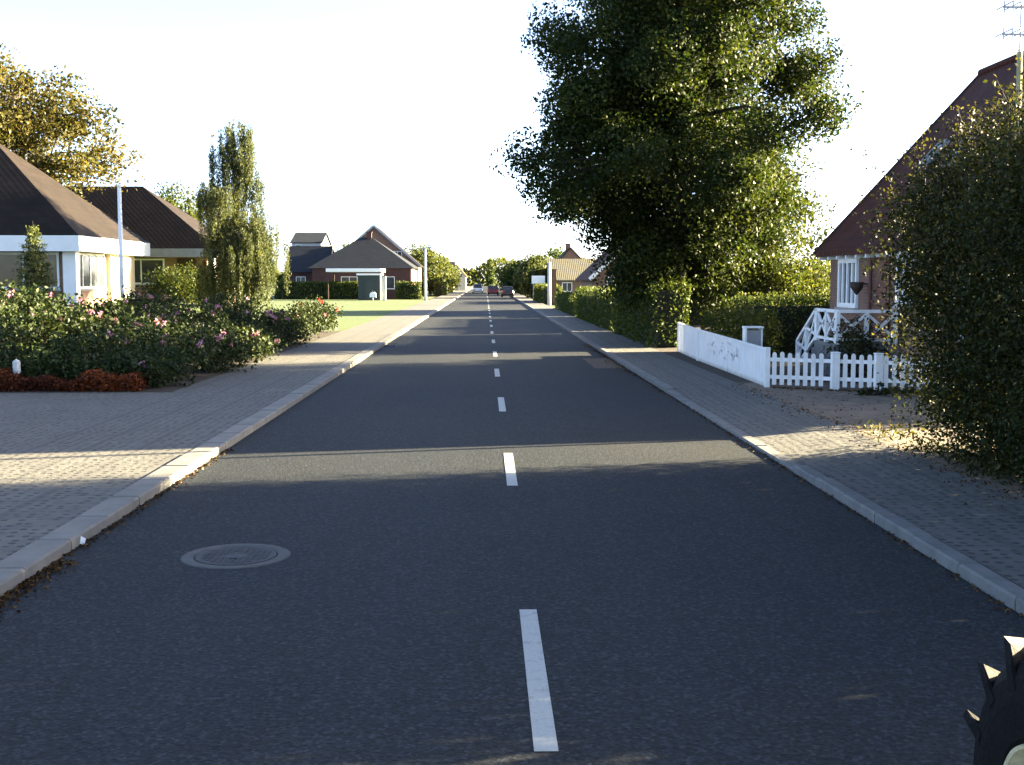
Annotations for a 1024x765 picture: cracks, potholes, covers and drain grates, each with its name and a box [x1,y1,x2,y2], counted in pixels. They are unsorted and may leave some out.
manhole cover [180,543,291,569]
